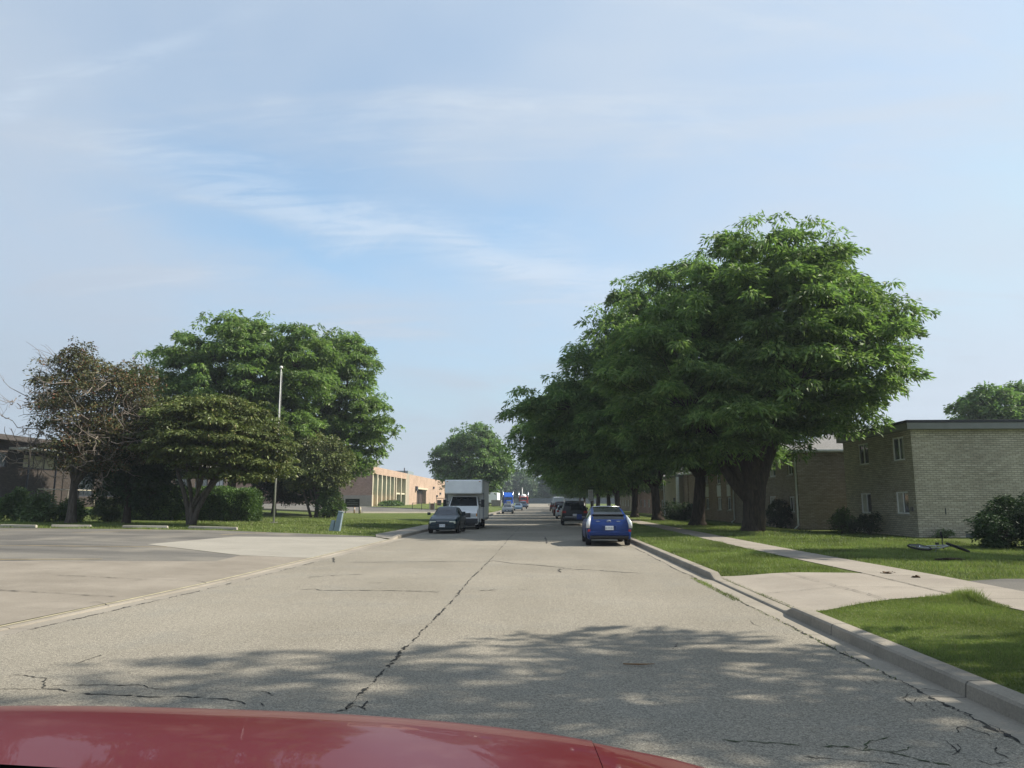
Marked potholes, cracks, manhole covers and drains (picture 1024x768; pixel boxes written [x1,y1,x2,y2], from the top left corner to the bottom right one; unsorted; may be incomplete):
crack [317,524,633,711]
crack [724,724,1021,766]
crack [13,674,273,705]
